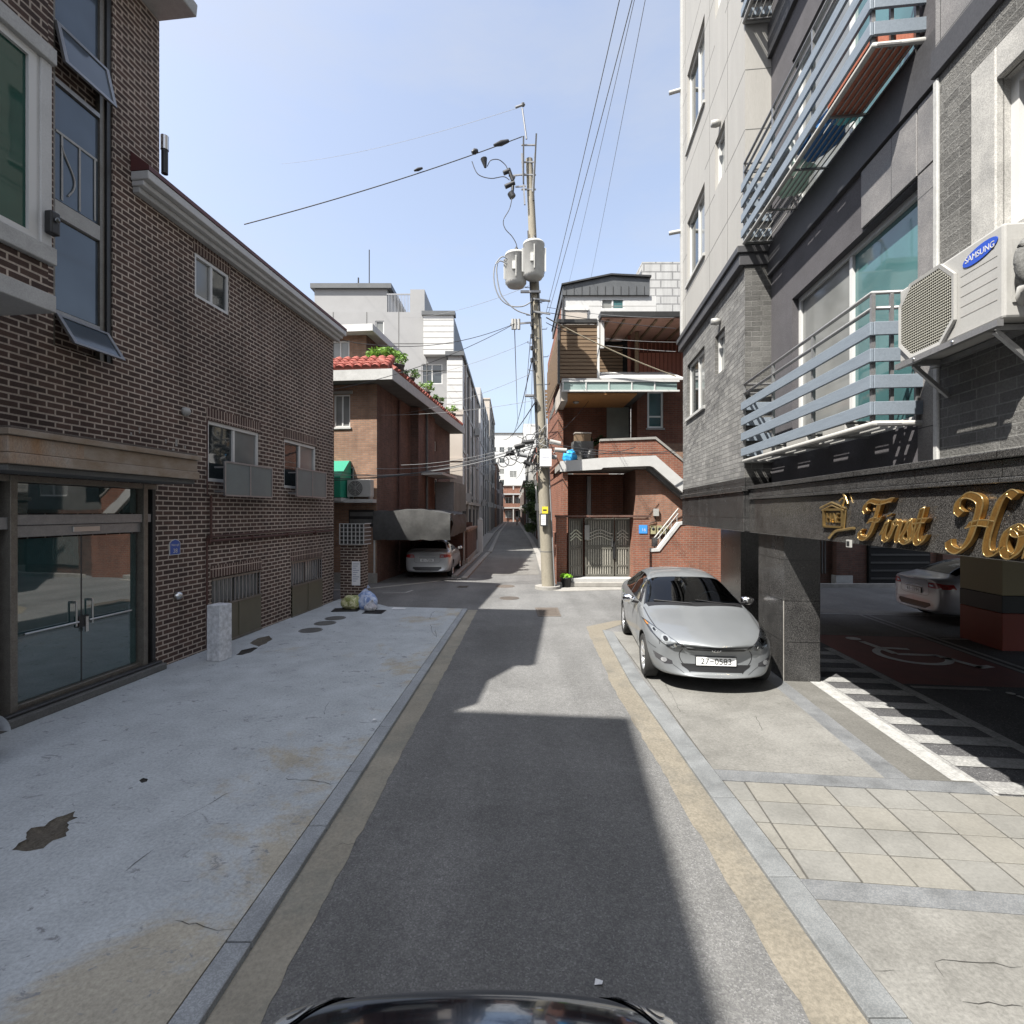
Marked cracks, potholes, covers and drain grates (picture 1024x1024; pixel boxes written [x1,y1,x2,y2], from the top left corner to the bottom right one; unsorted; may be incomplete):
pothole [12,811,77,851]
crack [935,959,1023,974]
